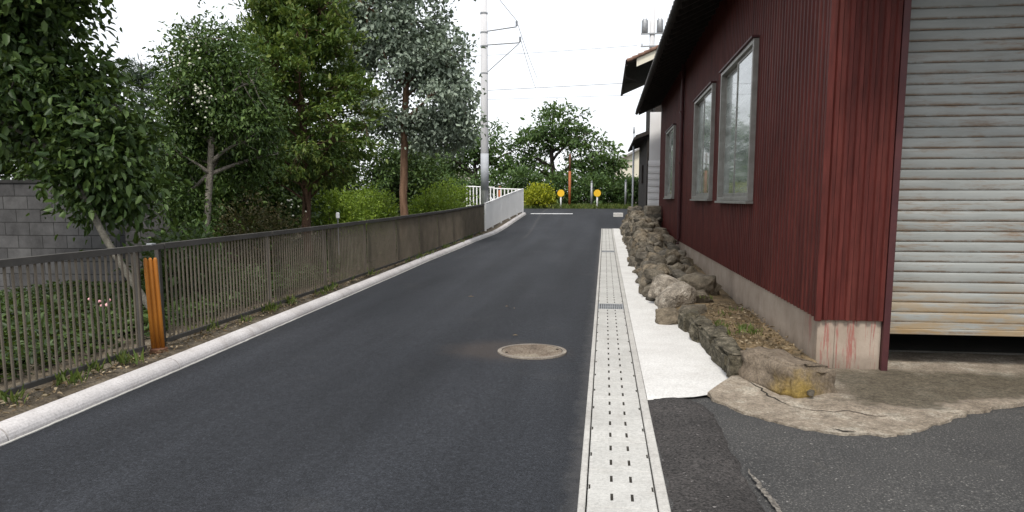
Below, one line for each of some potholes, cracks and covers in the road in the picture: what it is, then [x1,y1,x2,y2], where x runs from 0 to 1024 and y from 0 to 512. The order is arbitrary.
manhole cover [498,344,567,360]
crack [749,381,873,432]
